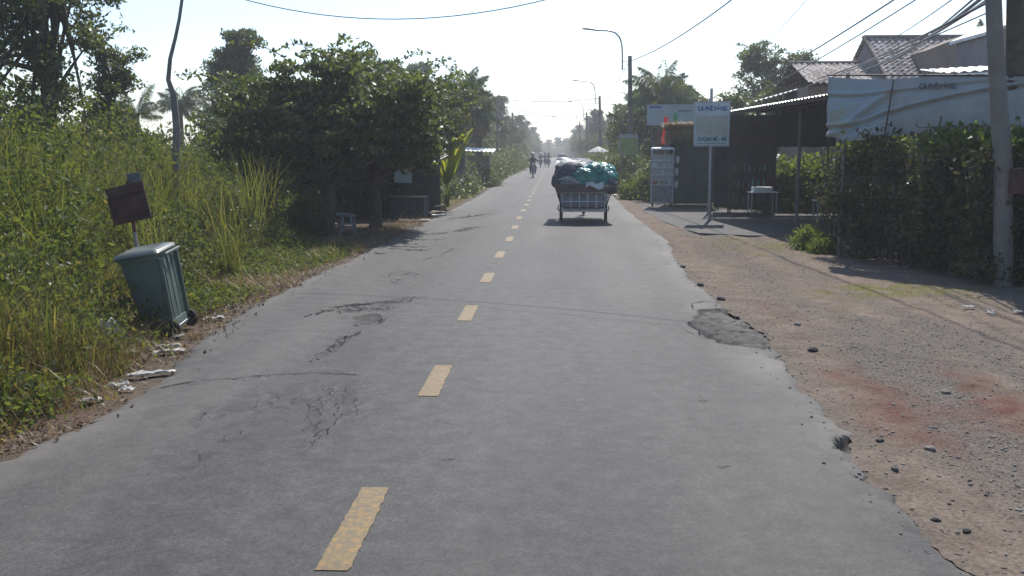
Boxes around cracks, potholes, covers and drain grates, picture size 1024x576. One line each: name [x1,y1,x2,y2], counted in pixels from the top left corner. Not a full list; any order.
pothole [351,313,382,325]
pothole [686,308,771,349]
pothole [832,435,852,455]
crack [304,214,489,324]
crack [161,331,362,448]
